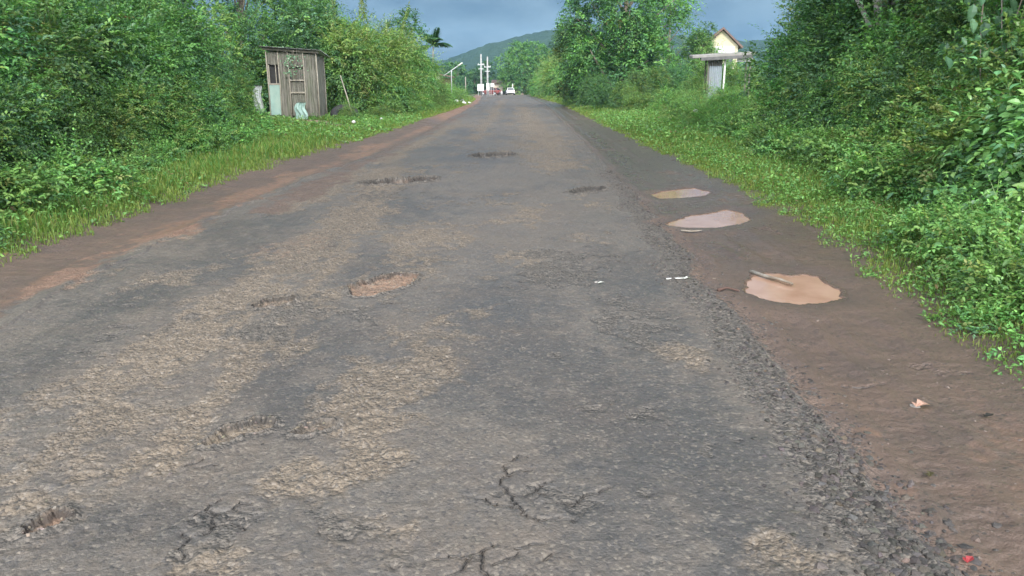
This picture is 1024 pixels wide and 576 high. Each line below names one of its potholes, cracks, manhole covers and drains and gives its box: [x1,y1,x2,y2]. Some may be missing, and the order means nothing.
crack [434,542,553,576]
crack [177,499,252,560]
pothole [248,294,298,310]
pothole [356,175,441,187]
pothole [287,417,342,437]
pothole [563,185,609,195]
pothole [647,188,714,199]
pothole [198,415,281,448]
pothole [344,272,422,298]
pothole [15,503,81,538]
pothole [738,271,851,306]
pothole [661,209,755,228]
